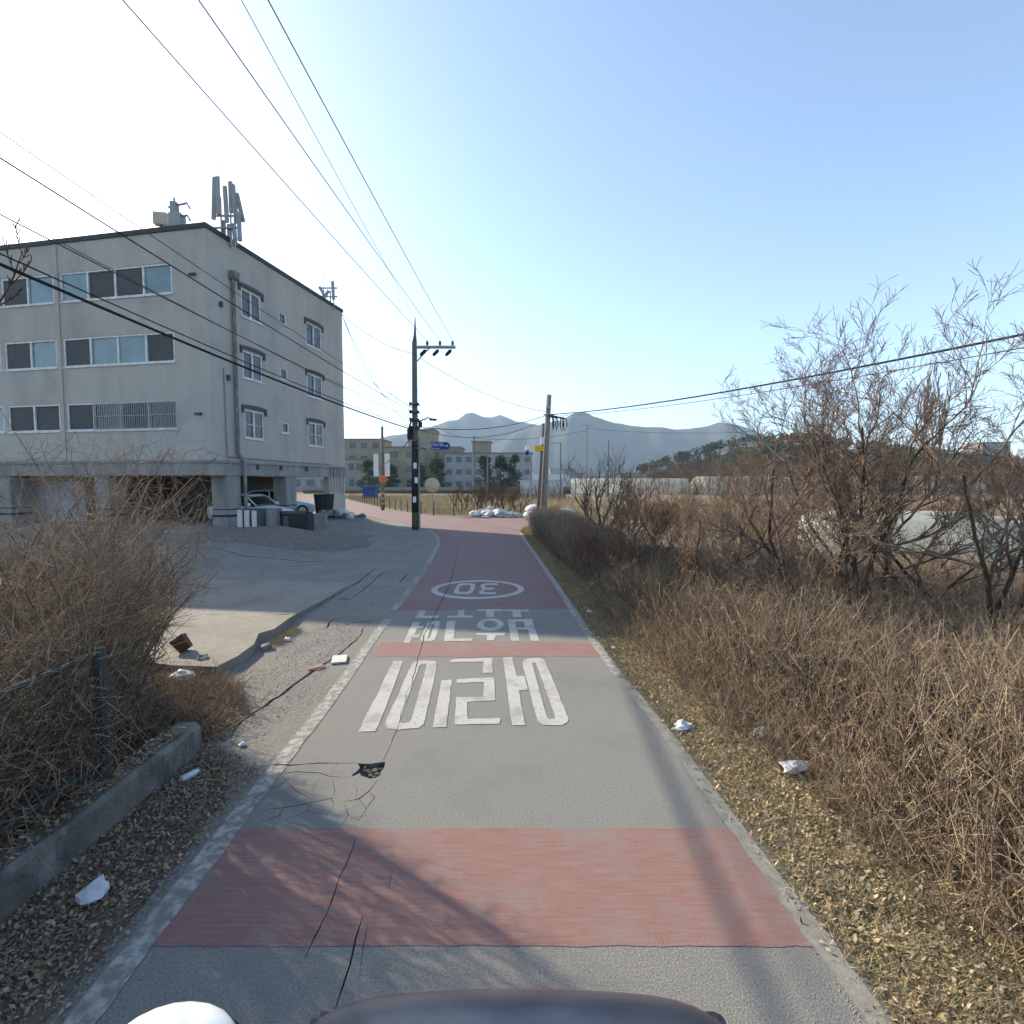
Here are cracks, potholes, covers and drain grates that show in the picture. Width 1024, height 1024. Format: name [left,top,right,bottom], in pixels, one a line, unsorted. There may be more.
crack [218,548,382,738]
pothole [352,762,385,779]
crack [383,547,459,760]
crack [304,841,369,1009]
crack [240,763,377,825]
